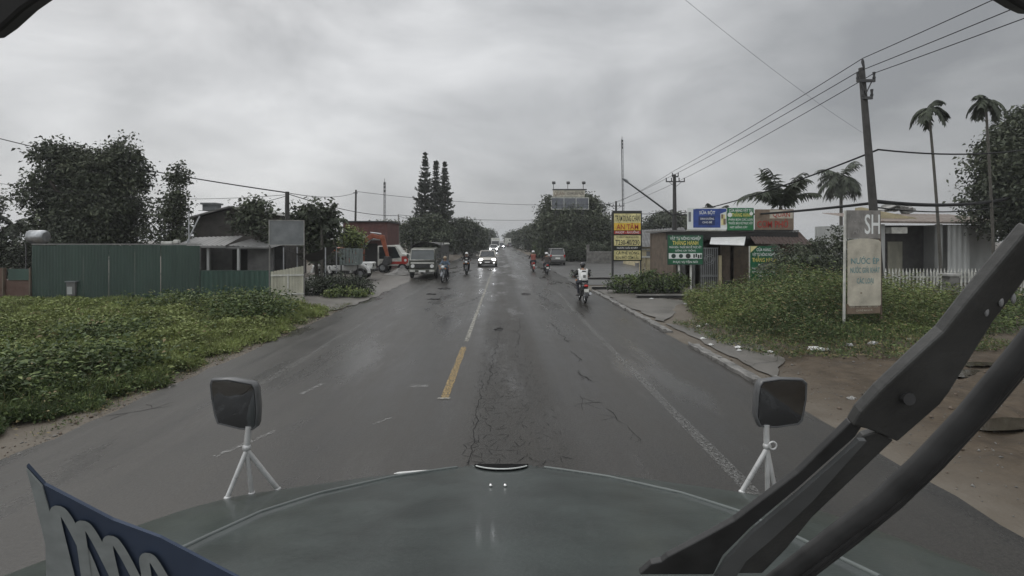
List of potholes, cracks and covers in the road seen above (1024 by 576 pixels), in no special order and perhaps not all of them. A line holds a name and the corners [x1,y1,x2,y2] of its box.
crack [533,284,641,441]
crack [462,318,573,466]
